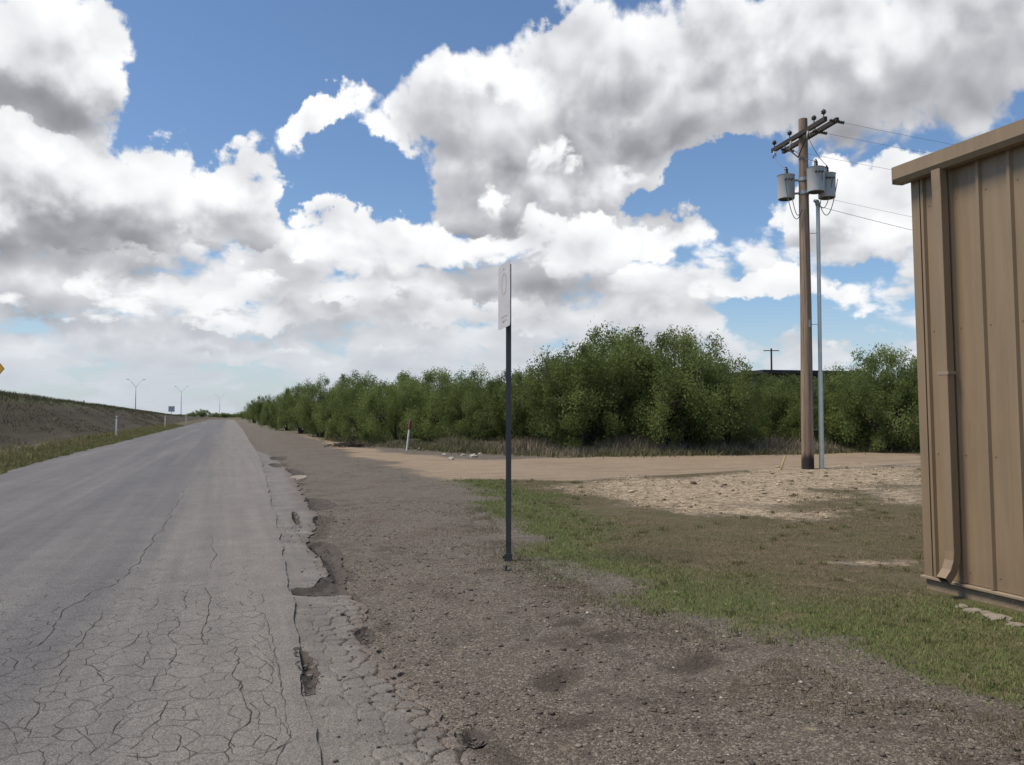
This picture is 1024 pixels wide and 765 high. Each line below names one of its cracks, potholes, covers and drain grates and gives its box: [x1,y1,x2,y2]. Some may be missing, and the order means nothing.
pothole [463,729,490,750]
pothole [305,498,338,510]
crack [311,601,477,765]
pothole [289,541,352,597]
crack [0,480,296,765]
pothole [293,647,322,696]
pothole [352,626,378,646]
